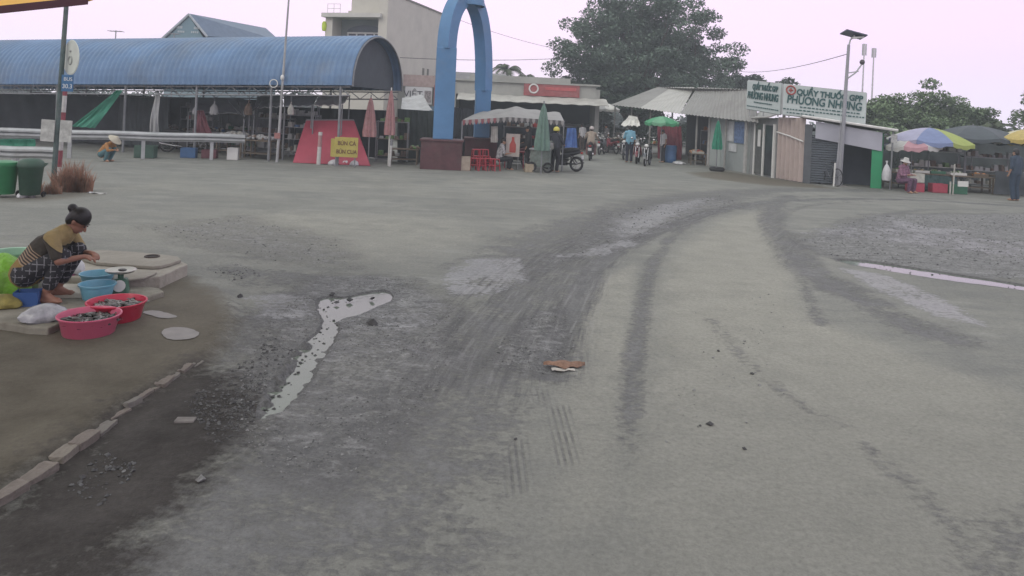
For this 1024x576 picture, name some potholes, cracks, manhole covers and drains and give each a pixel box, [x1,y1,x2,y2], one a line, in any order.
pothole [255,289,394,419]
